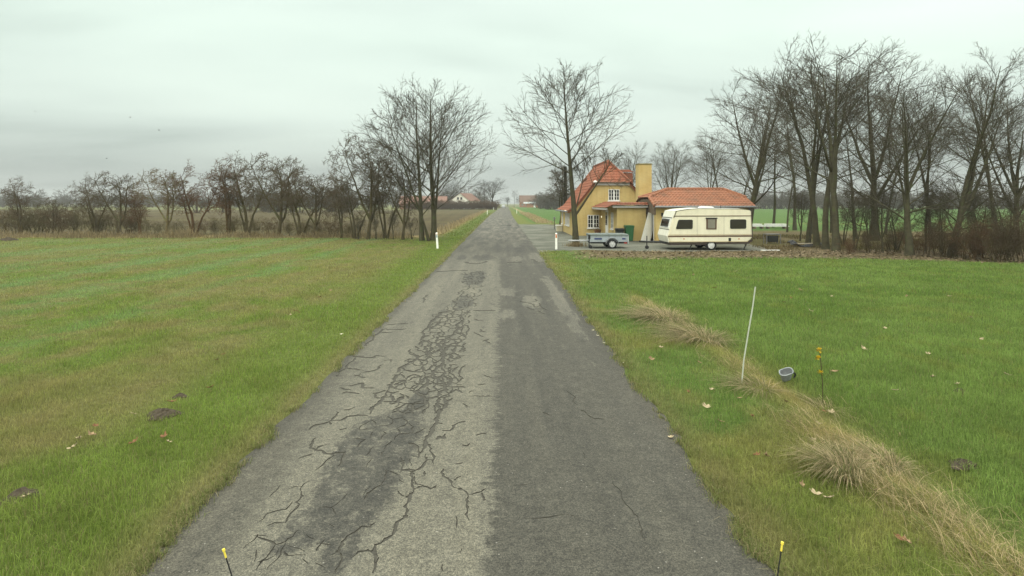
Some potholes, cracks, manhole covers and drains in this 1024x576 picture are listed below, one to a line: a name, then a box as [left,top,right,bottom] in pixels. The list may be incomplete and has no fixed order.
crack [612,482,645,540]
crack [243,272,495,573]
